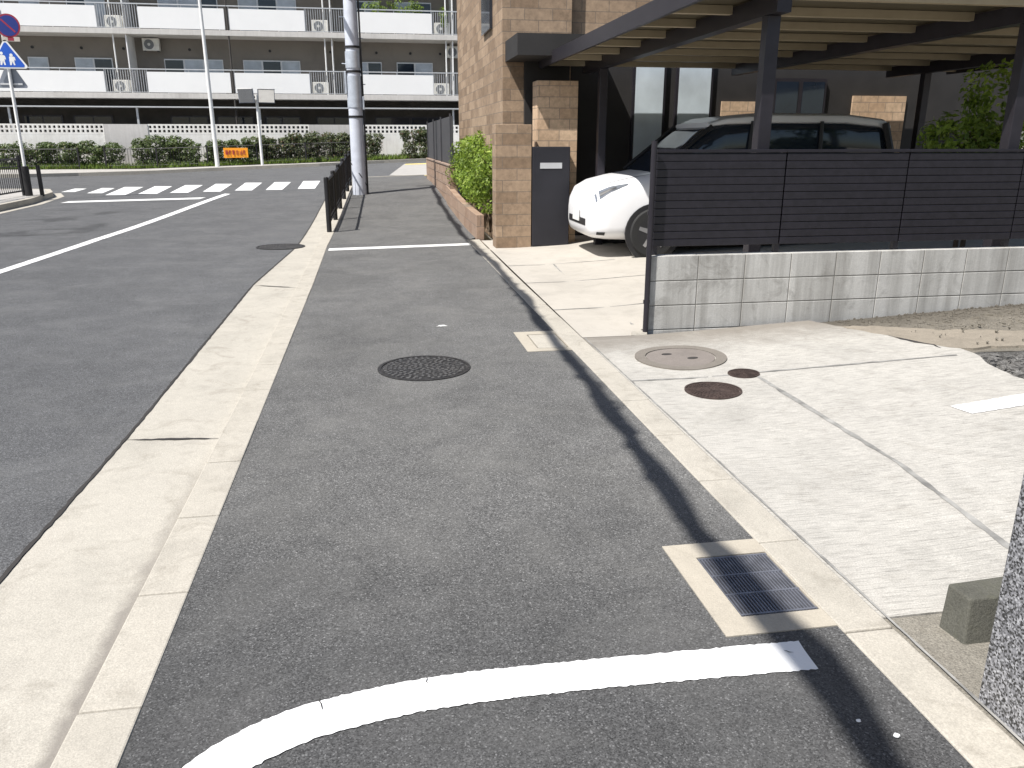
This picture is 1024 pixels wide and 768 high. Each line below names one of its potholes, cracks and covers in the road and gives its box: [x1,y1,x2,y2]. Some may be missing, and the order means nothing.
manhole cover [727,368,760,378]
drain grate [662,539,837,638]
manhole cover [378,355,470,381]
manhole cover [684,382,742,400]
manhole cover [635,345,727,371]
